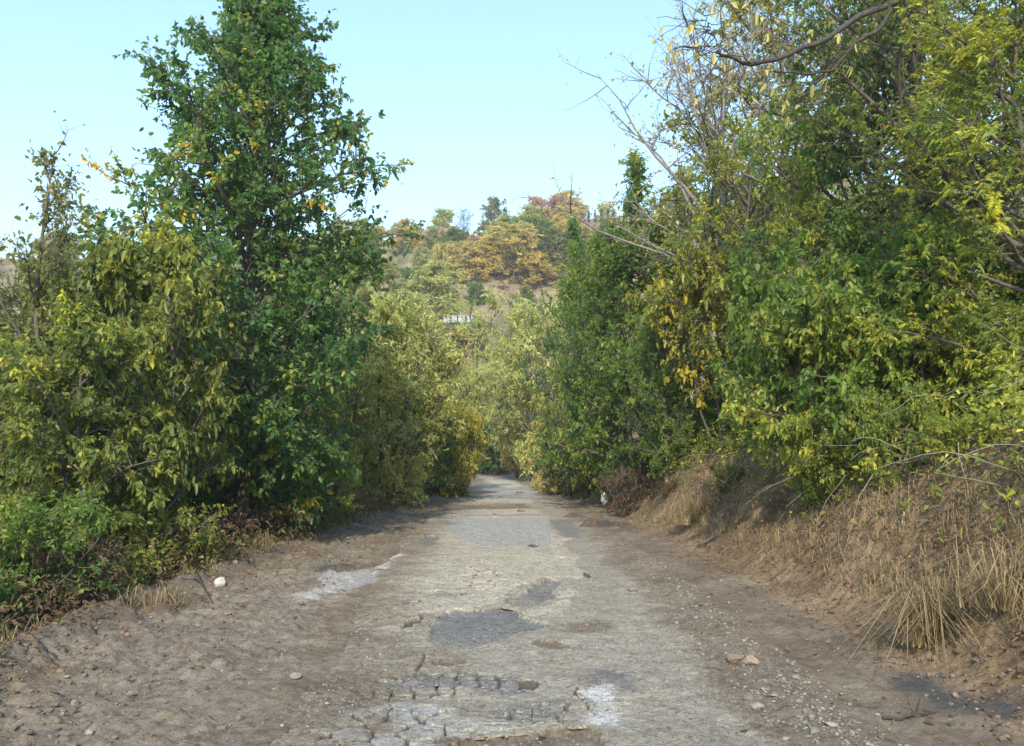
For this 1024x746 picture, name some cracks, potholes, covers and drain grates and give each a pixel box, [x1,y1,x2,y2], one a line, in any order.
crack [365,558,516,633]
pothole [524,638,582,651]
crack [292,651,597,746]
